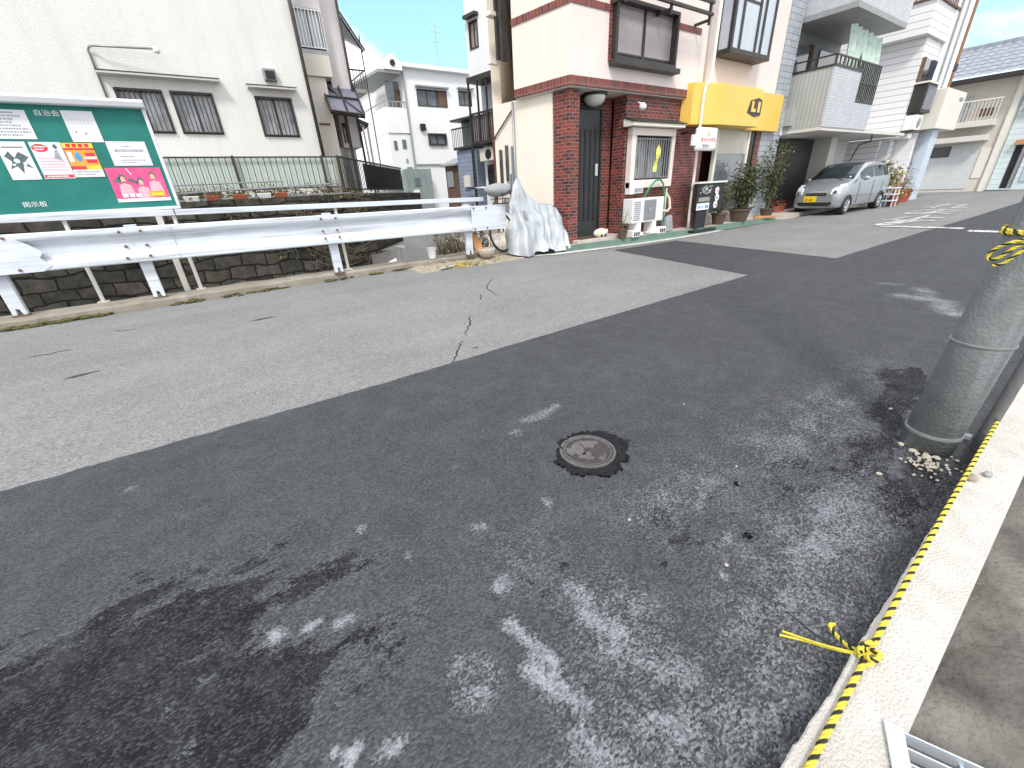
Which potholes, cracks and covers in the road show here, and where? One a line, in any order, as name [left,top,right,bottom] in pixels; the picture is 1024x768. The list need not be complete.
crack [452,280,498,362]
manhole cover [560,435,616,469]
drain grate [883,720,984,768]
